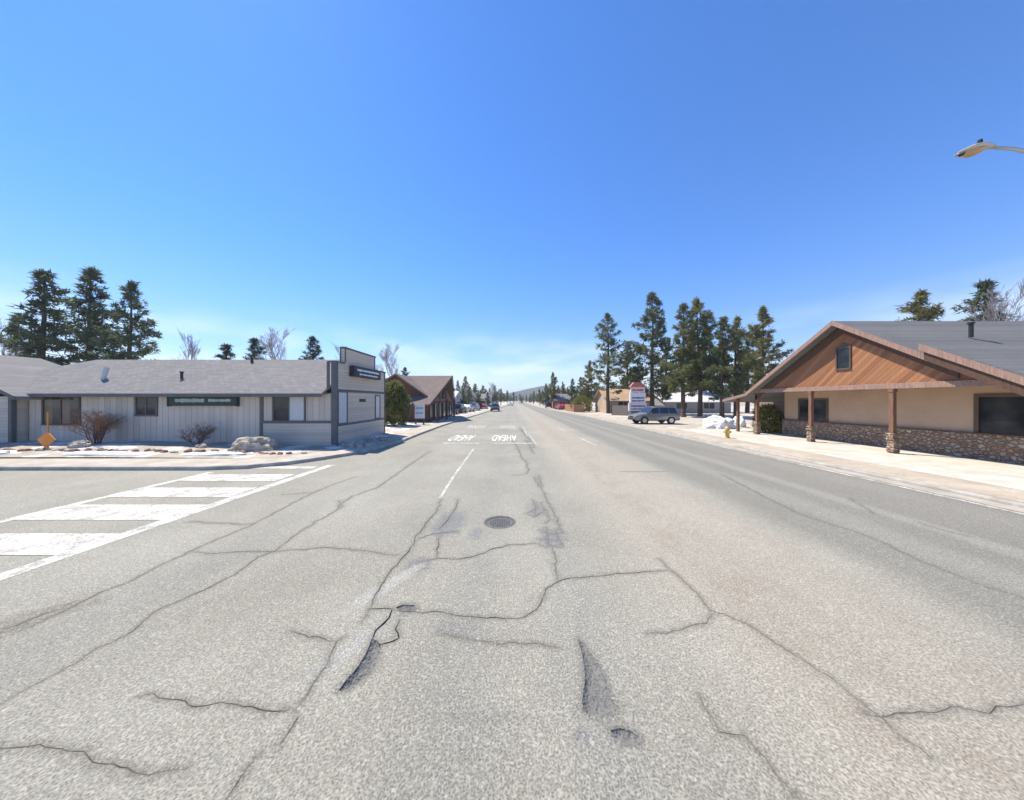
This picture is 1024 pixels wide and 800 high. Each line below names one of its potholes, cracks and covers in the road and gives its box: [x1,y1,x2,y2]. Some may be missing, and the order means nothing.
crack [372,429,1024,758]
pothole [339,638,381,691]
crack [226,719,298,800]
pothole [578,639,617,715]
crack [0,744,185,776]
crack [699,695,799,799]
manhole cover [484,516,516,529]
crack [0,457,422,704]
pothole [396,605,416,613]
pothole [610,728,638,744]
